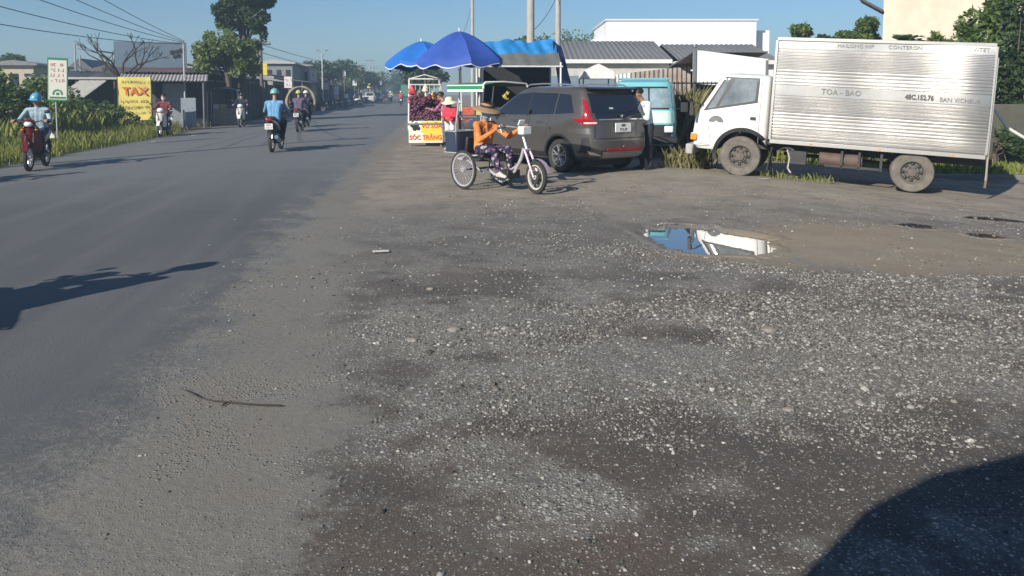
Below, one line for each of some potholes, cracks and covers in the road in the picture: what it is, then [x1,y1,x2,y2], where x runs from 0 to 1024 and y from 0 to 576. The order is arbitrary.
pothole [623,221,793,259]
pothole [956,215,1024,224]
pothole [957,232,1017,241]
pothole [887,222,945,231]
